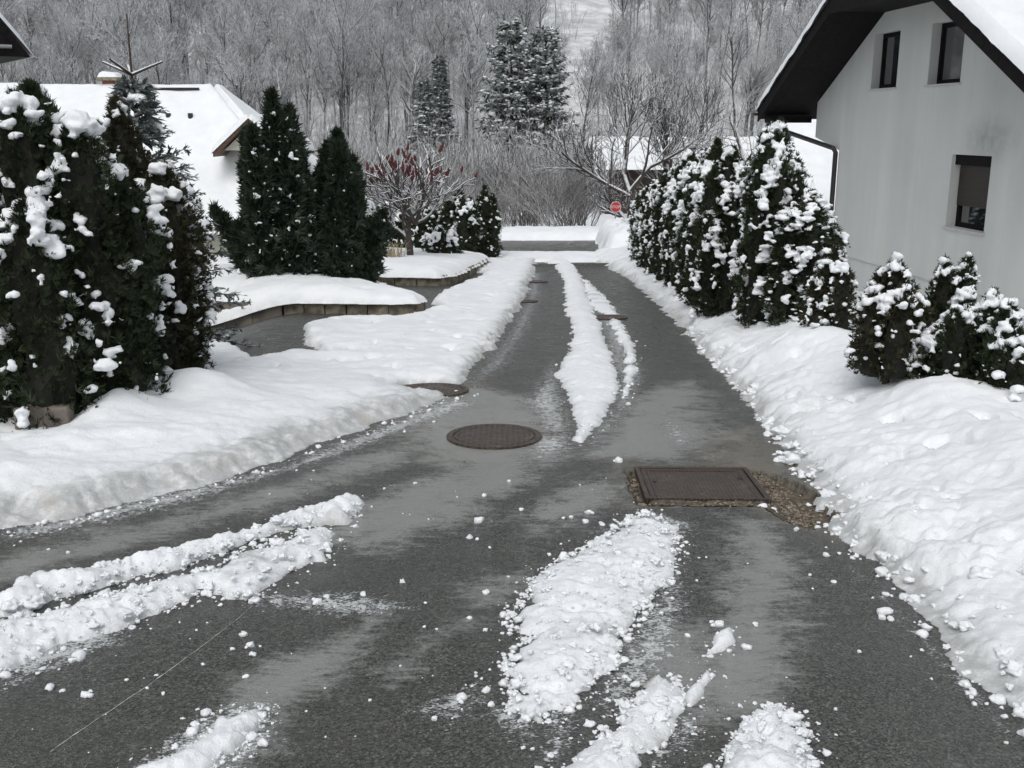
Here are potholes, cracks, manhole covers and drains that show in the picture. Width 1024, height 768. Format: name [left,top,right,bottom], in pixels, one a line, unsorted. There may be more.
crack [52,606,252,751]
manhole cover [447,424,542,450]
utility cover [634,466,771,505]
manhole cover [404,383,469,397]
